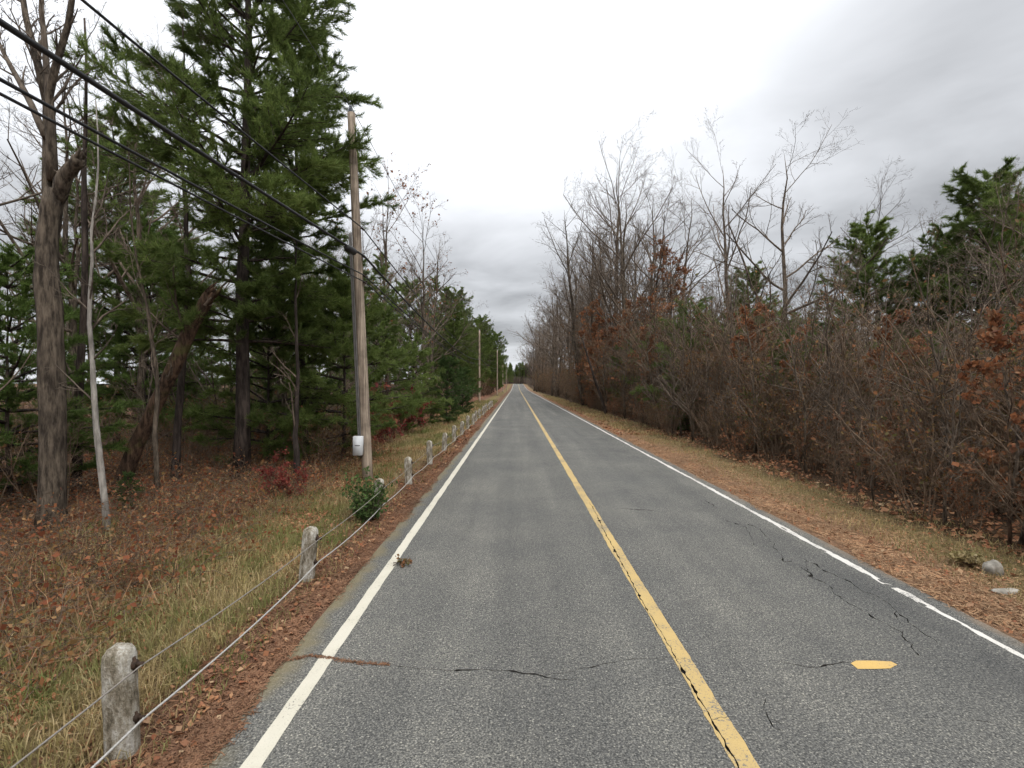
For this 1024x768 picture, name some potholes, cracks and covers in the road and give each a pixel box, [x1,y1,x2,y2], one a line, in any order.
crack [708,502,937,656]
crack [295,655,673,680]
